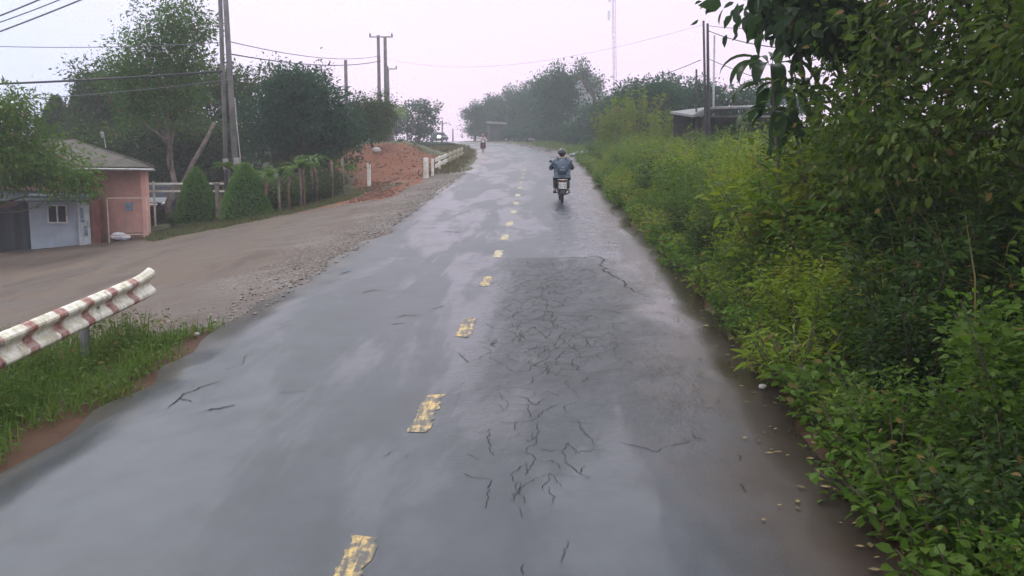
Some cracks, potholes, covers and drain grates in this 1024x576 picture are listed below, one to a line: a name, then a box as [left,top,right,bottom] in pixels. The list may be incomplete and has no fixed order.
crack [466,261,632,574]
crack [168,358,245,411]
